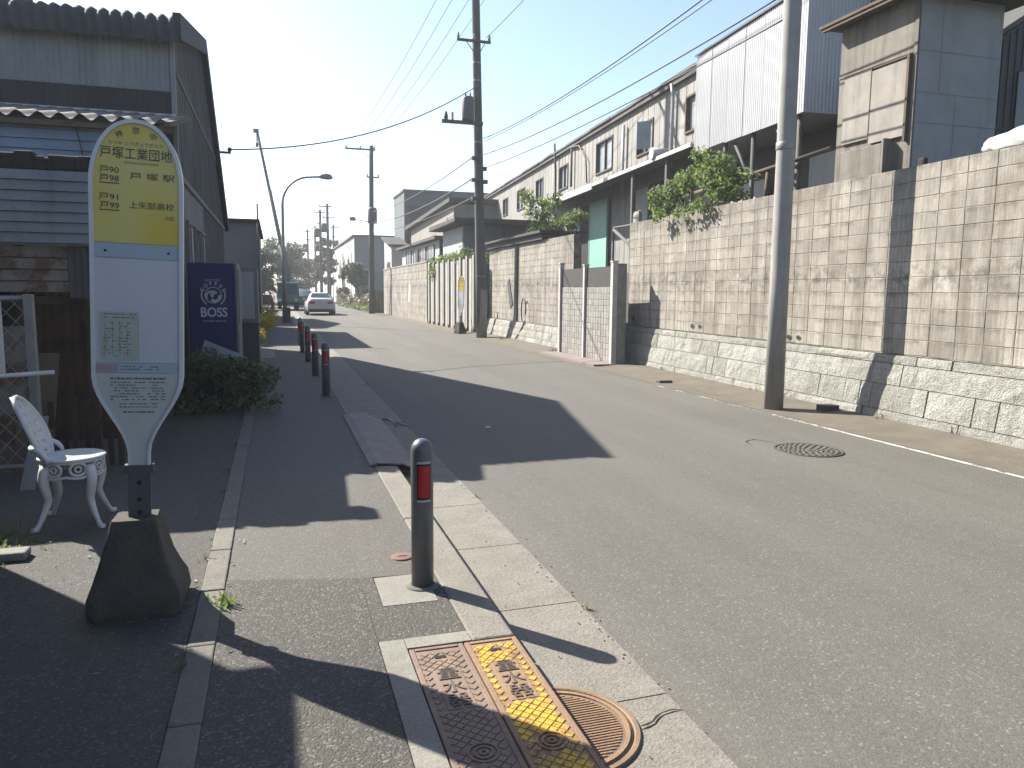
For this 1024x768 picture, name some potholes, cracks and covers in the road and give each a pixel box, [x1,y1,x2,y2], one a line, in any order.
manhole cover [773,443,845,458]
manhole cover [464,636,606,768]
manhole cover [550,686,642,768]
manhole cover [409,643,528,768]
utility cover [391,553,411,561]
